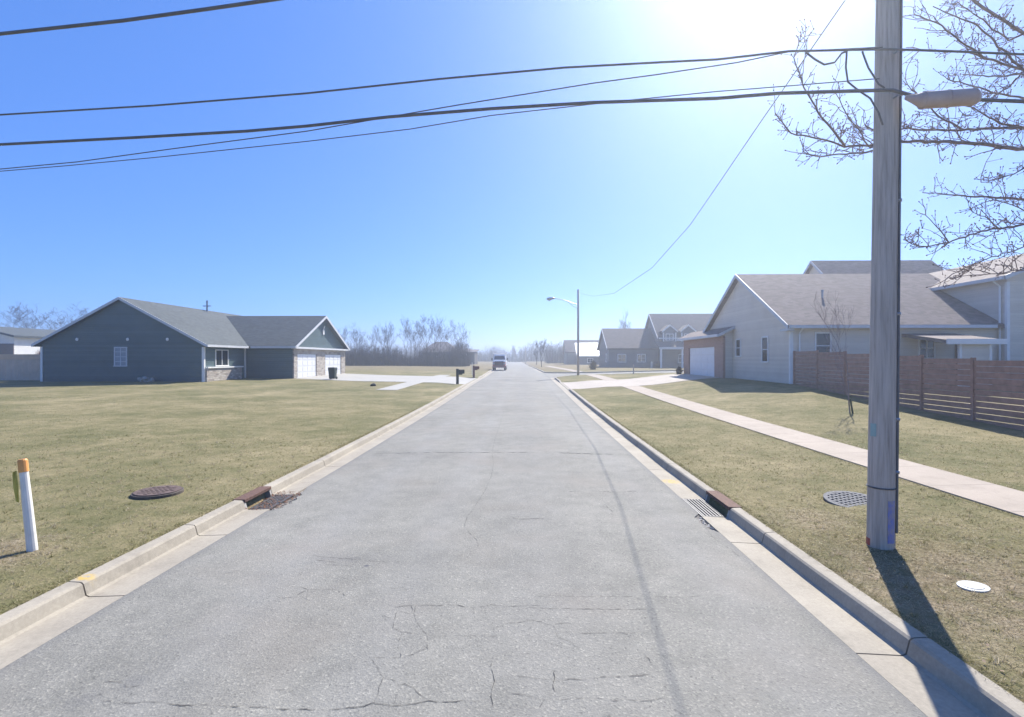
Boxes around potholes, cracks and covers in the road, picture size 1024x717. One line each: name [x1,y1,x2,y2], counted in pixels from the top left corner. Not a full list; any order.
crack [491,653,662,706]
drain grate [682,491,742,517]
crack [424,419,589,539]
manhole cover [823,491,867,507]
manhole cover [130,485,184,500]
drain grate [233,486,301,510]
crack [385,588,710,658]
